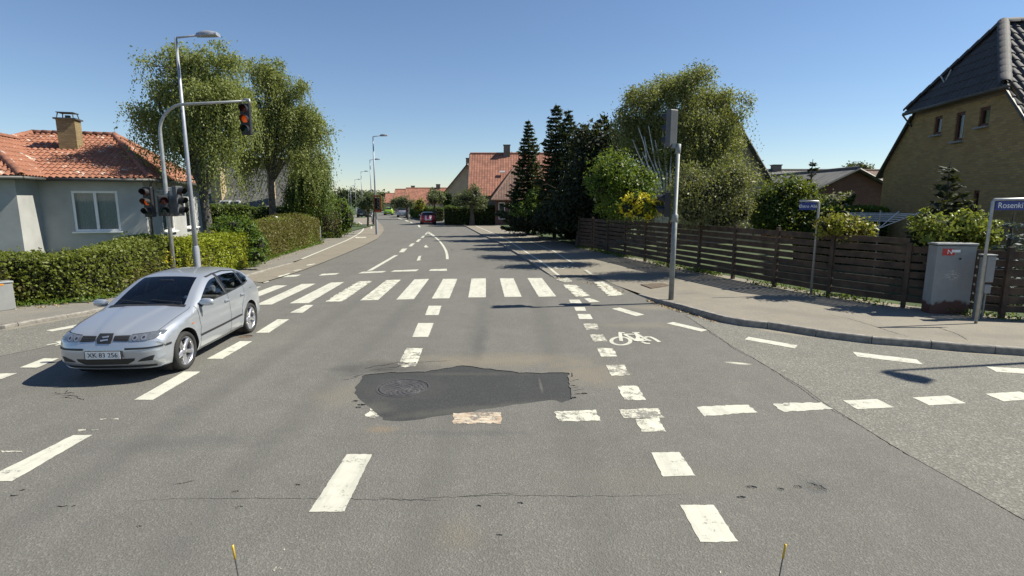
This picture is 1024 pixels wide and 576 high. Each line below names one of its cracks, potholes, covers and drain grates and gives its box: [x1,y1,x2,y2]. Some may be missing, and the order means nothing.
crack [142,493,676,501]
manhole cover [376,379,431,397]
pothole [804,483,827,491]
